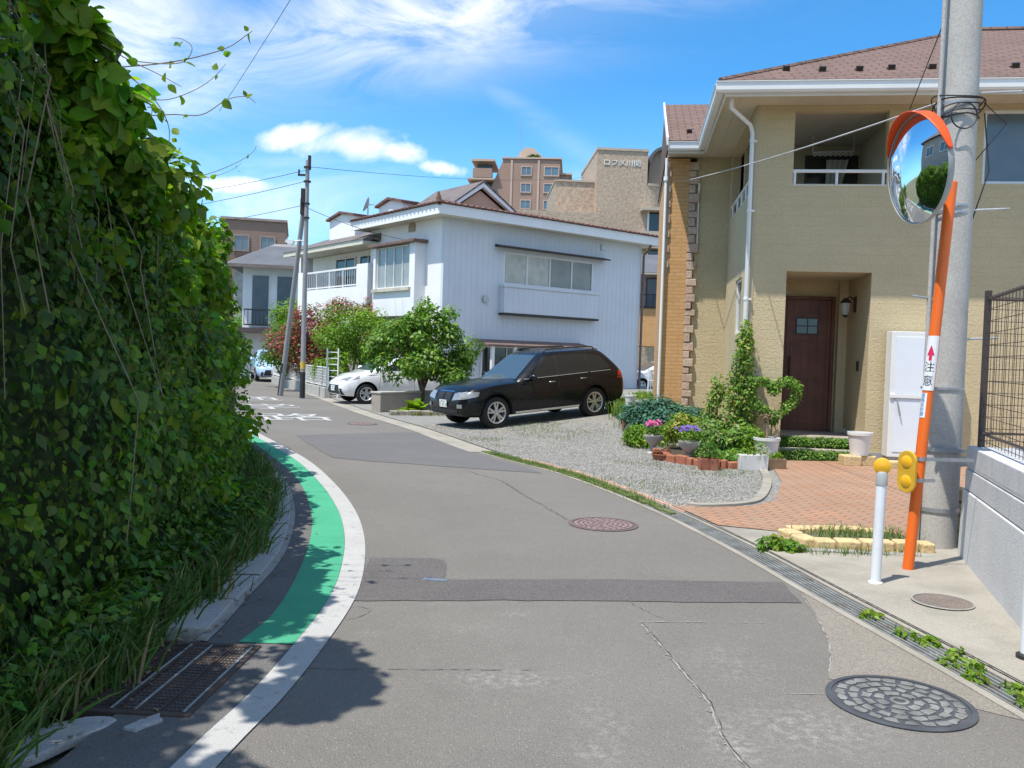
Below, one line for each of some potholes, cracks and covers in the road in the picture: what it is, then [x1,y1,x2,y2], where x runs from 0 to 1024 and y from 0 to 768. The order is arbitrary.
manhole cover [568,517,638,531]
crack [627,599,761,768]
drain grate [56,640,261,721]
manhole cover [911,593,976,610]
manhole cover [825,675,979,732]
crack [470,471,566,519]
